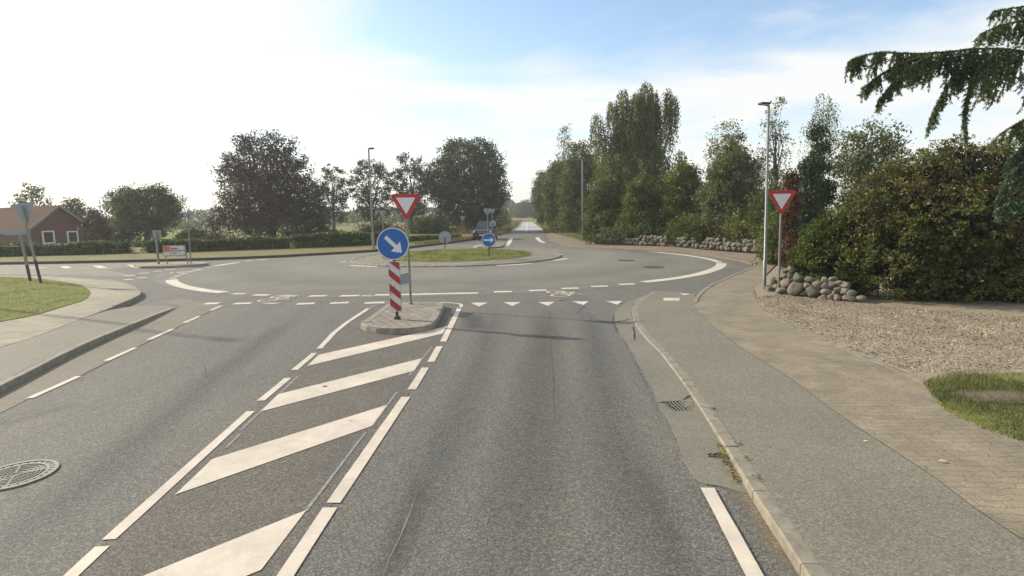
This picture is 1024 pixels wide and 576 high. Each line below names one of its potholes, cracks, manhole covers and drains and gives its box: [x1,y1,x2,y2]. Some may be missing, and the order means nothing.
manhole cover [0,459,60,491]
drain grate [662,400,693,412]
